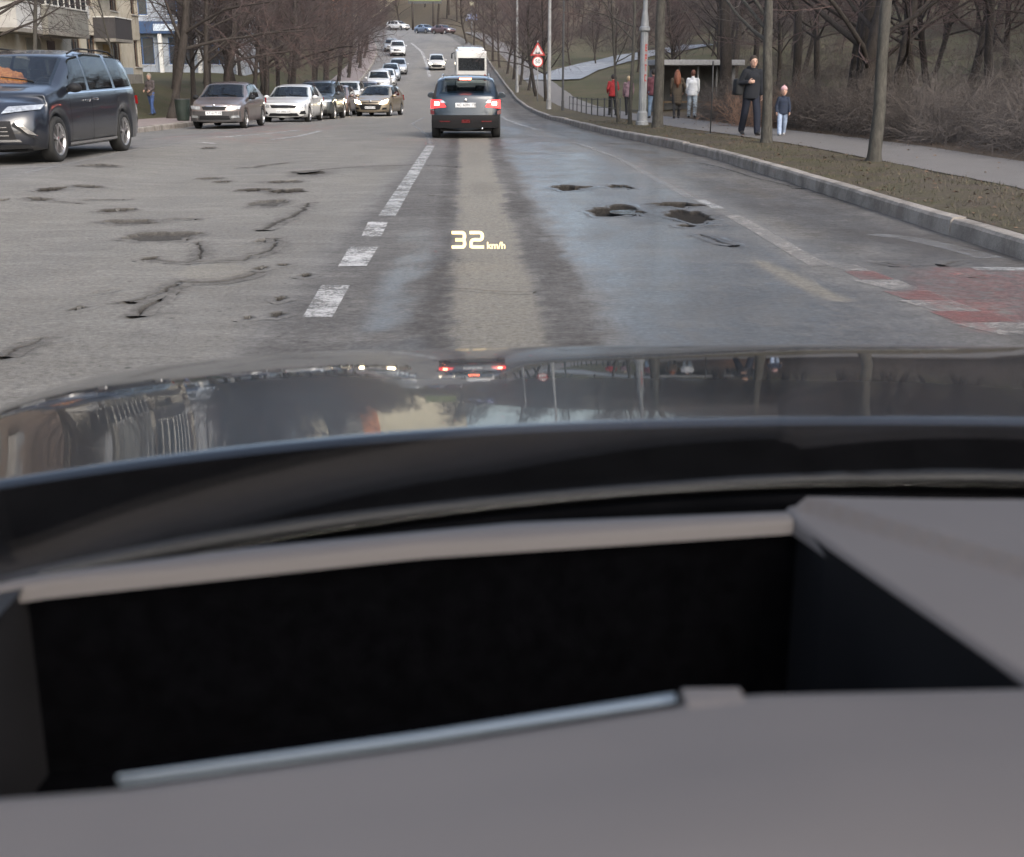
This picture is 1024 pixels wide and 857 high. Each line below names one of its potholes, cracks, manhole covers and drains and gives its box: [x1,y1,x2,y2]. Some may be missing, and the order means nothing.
pothole [579,203,653,218]
pothole [241,199,295,207]
crack [0,338,55,357]
pothole [544,184,597,192]
pothole [111,231,213,243]
crack [98,239,286,317]
pothole [657,209,720,225]
